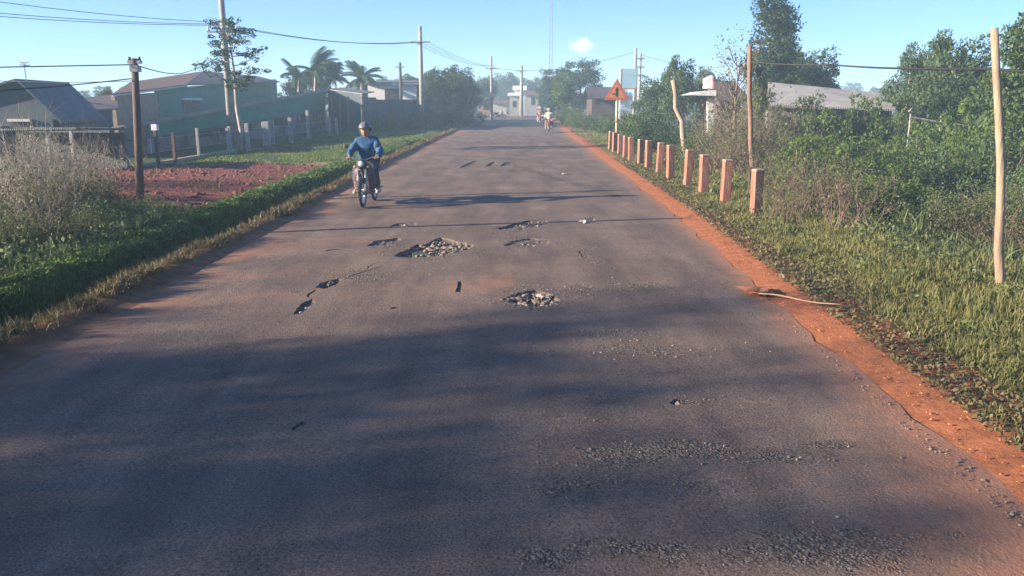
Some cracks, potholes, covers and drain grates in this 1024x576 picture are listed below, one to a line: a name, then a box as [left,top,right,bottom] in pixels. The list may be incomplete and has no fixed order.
pothole [294,299,315,314]
pothole [366,238,401,247]
pothole [504,238,551,248]
pothole [394,237,475,258]
pothole [494,220,549,232]
pothole [315,279,341,289]
pothole [503,290,560,308]
